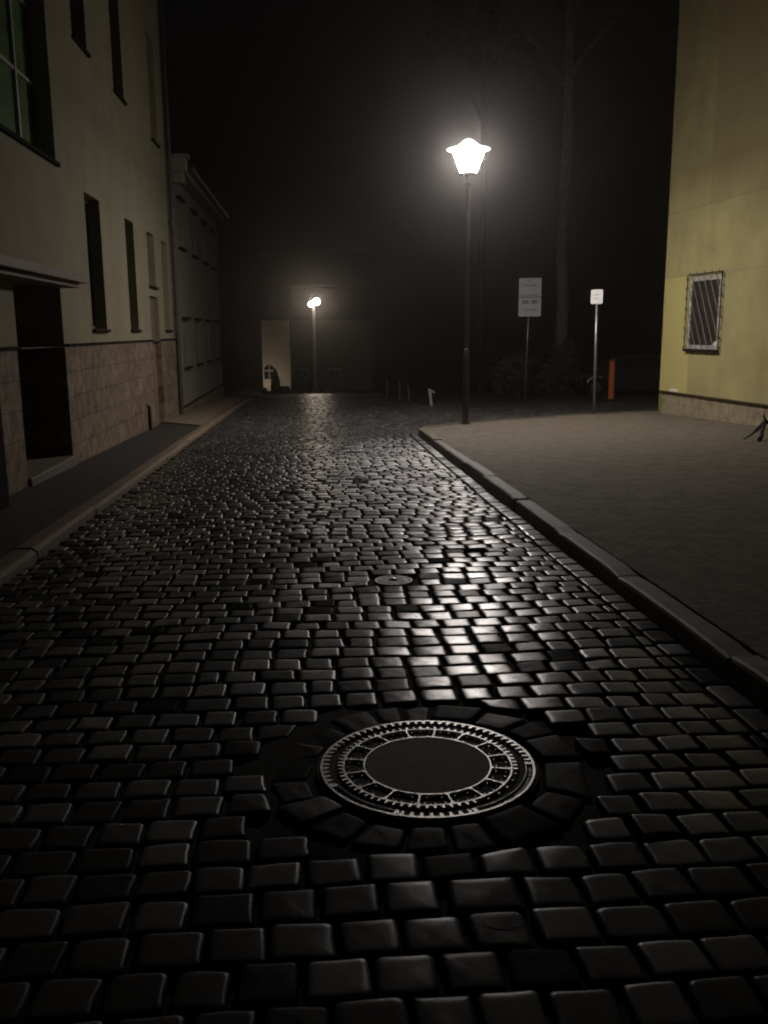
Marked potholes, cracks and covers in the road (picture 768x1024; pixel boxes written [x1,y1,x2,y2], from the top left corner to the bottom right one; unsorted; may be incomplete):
manhole cover [317,720,539,828]
manhole cover [374,575,413,588]
